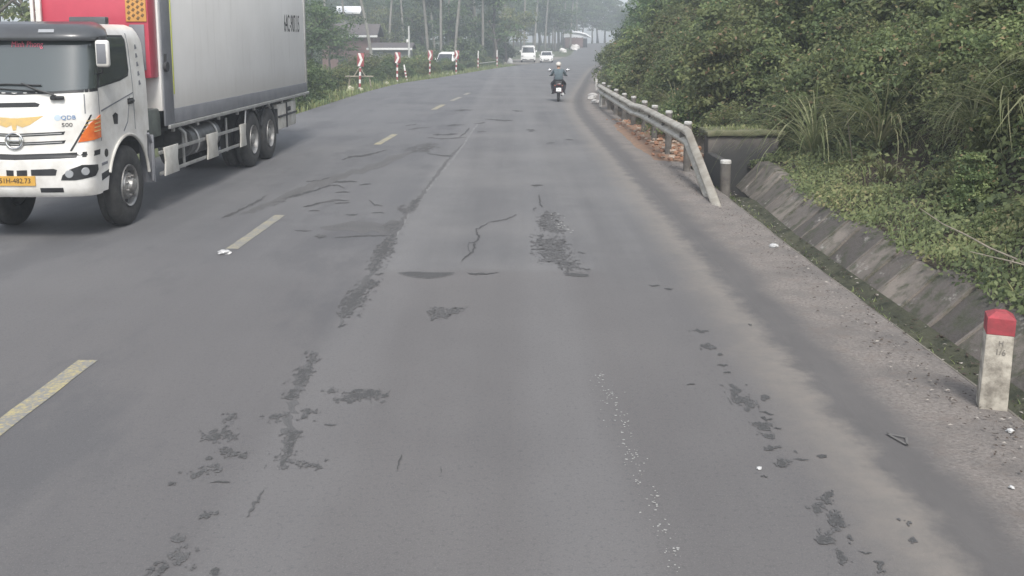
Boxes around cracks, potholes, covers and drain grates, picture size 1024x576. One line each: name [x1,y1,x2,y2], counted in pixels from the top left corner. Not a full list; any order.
pothole [836,548,853,565]
crack [406,109,520,157]
pothole [333,389,390,403]
pothole [167,533,200,571]
pothole [722,384,759,411]
pothole [178,462,223,479]
pothole [748,421,773,432]
crack [223,177,383,217]
